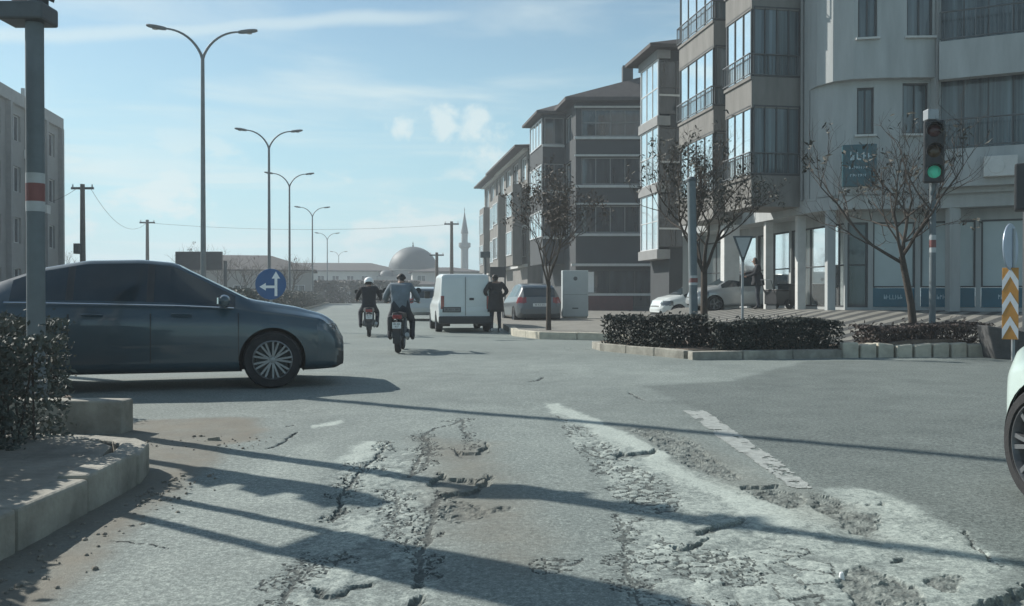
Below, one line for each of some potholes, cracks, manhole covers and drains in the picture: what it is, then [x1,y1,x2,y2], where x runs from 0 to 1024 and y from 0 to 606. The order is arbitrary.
pothole [745,489,809,509]
pothole [808,492,884,537]
crack [367,418,482,584]
pothole [454,441,492,460]
crack [268,425,298,449]
pothole [440,474,495,500]
crack [967,535,1002,568]
crack [528,416,836,606]
pothole [426,471,489,493]
